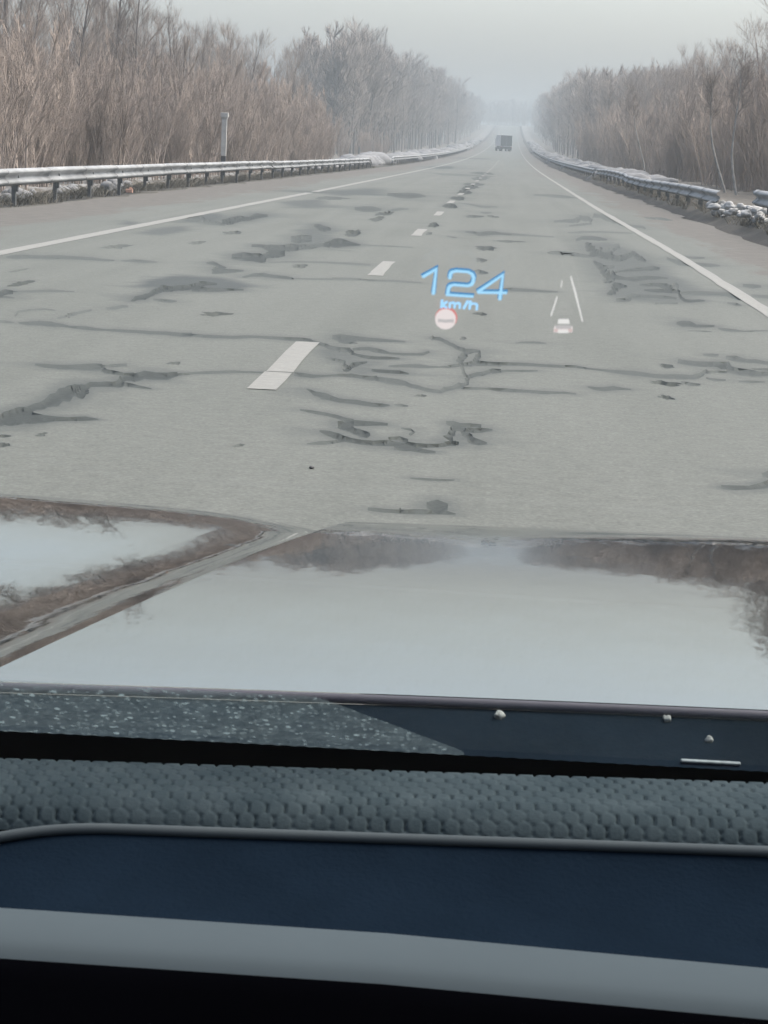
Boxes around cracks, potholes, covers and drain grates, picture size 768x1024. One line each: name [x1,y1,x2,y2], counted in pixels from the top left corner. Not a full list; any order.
crack [0,213,768,453]
